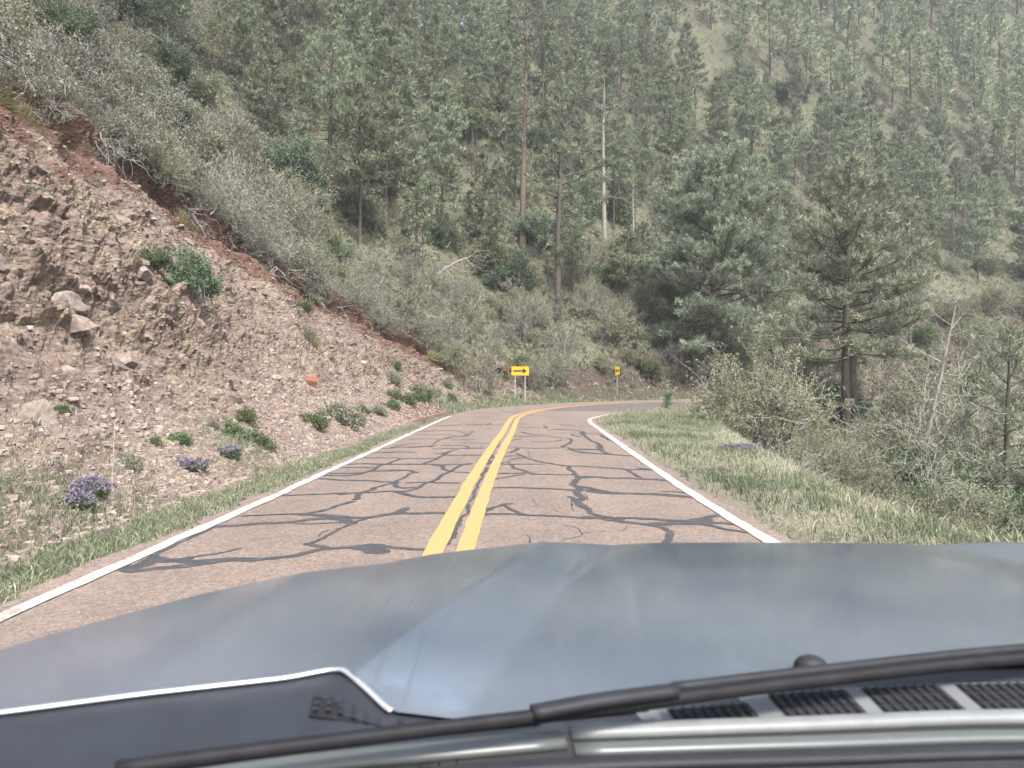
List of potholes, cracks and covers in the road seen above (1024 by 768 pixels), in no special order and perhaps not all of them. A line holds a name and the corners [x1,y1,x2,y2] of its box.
crack [555,493,627,539]
